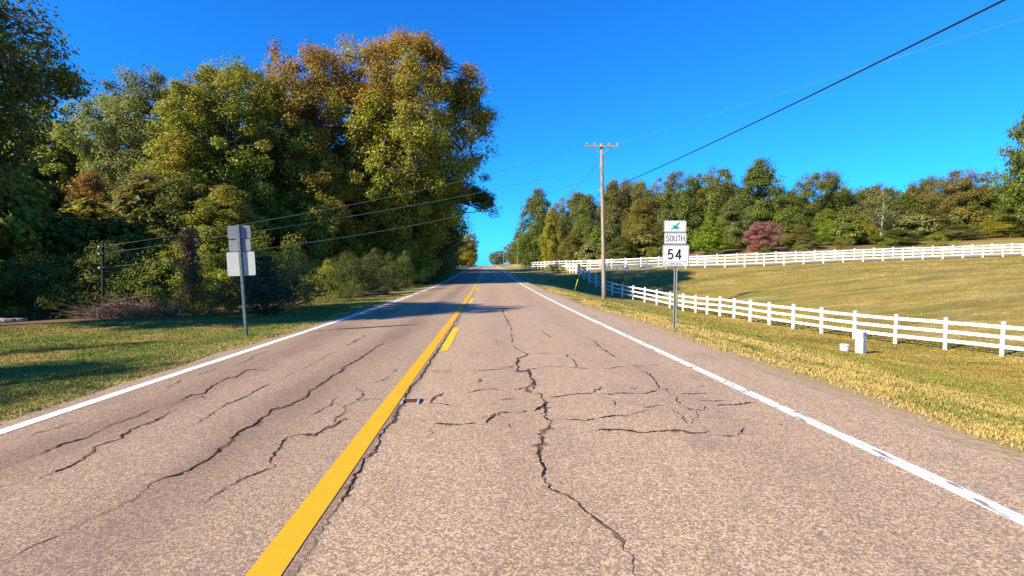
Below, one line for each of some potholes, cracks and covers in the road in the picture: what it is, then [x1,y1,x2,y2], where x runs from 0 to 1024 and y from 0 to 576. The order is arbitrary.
crack [421,308,781,576]
crack [0,335,396,563]
